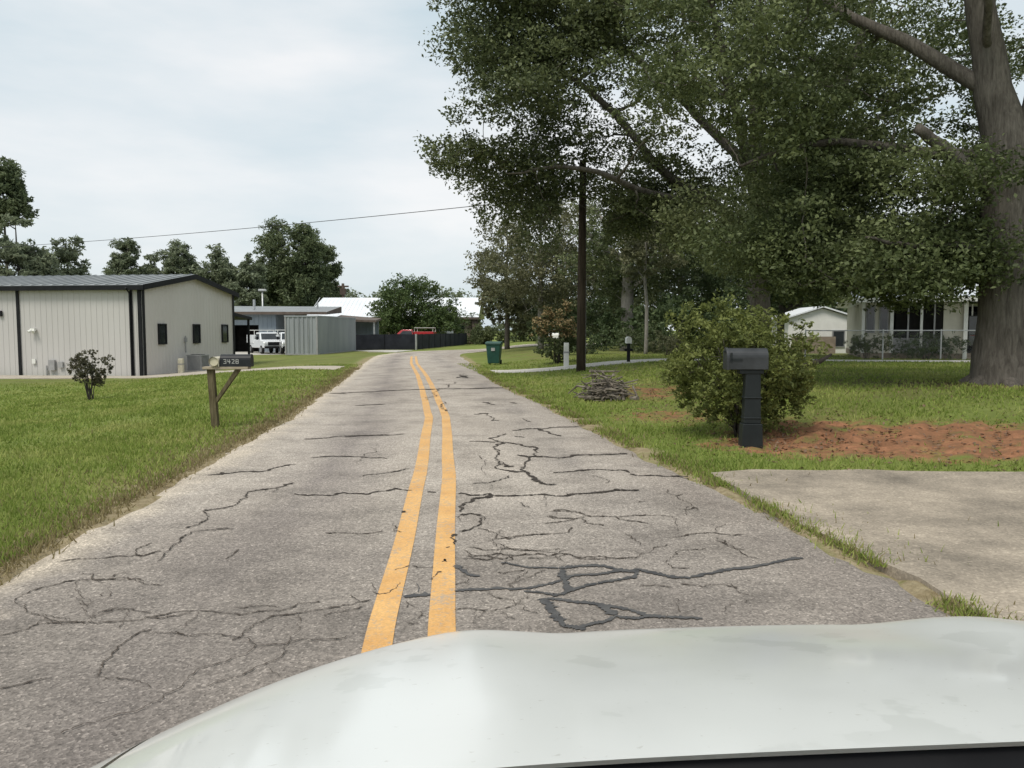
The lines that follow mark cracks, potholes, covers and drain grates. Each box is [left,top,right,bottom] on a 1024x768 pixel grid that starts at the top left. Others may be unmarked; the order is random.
crack [2,402,757,733]
